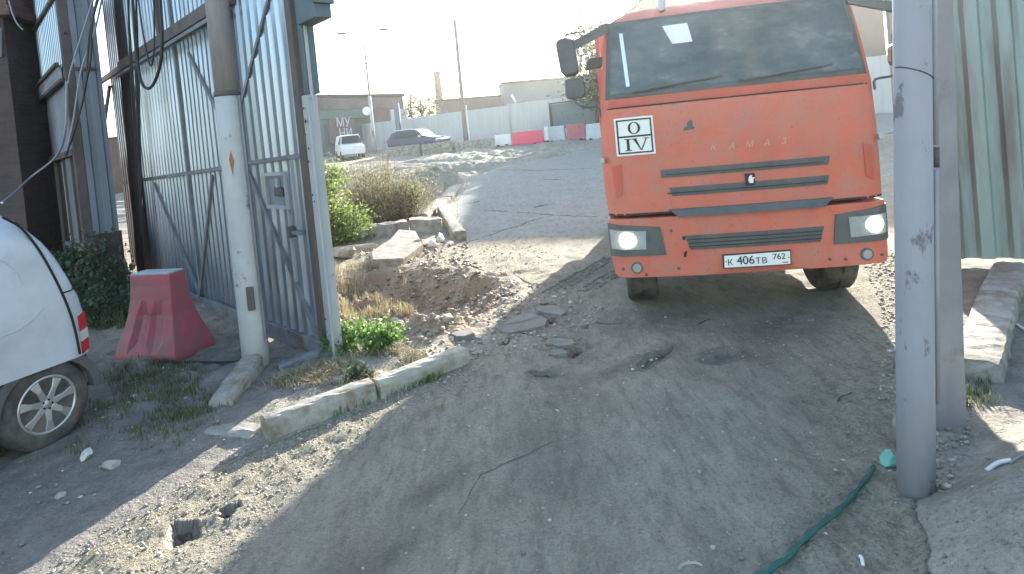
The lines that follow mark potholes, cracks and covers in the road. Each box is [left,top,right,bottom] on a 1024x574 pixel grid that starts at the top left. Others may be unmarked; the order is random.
pothole [694,346,749,365]
crack [458,441,553,514]
crack [465,201,608,243]
pothole [632,344,678,372]
pothole [159,518,207,552]
pothole [212,498,247,523]
